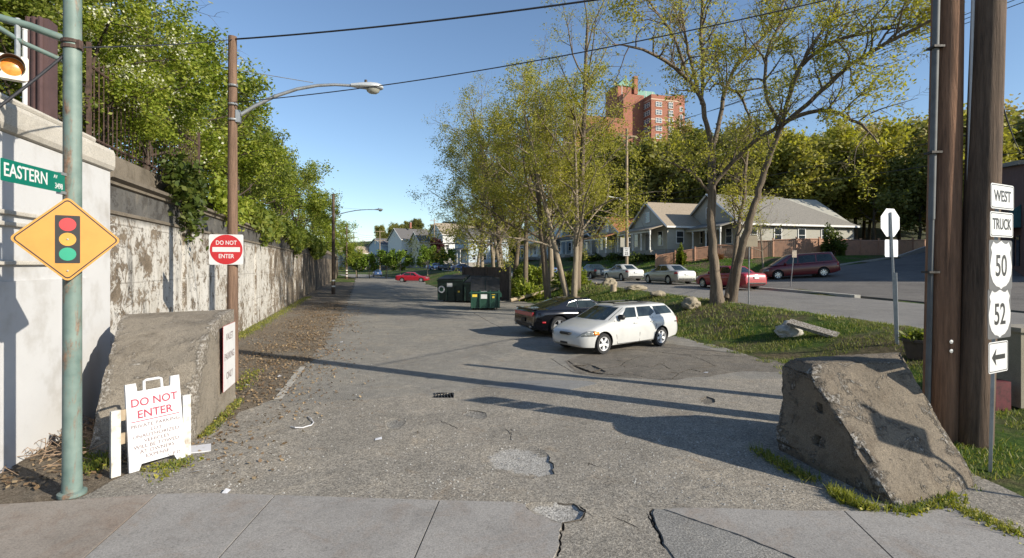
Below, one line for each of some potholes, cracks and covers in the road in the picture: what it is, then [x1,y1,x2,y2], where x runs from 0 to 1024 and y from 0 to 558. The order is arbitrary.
pothole [525,502,584,525]
pothole [385,418,407,430]
crack [555,506,594,558]
pothole [462,410,487,420]
pothole [479,444,554,479]
crack [615,509,665,548]
